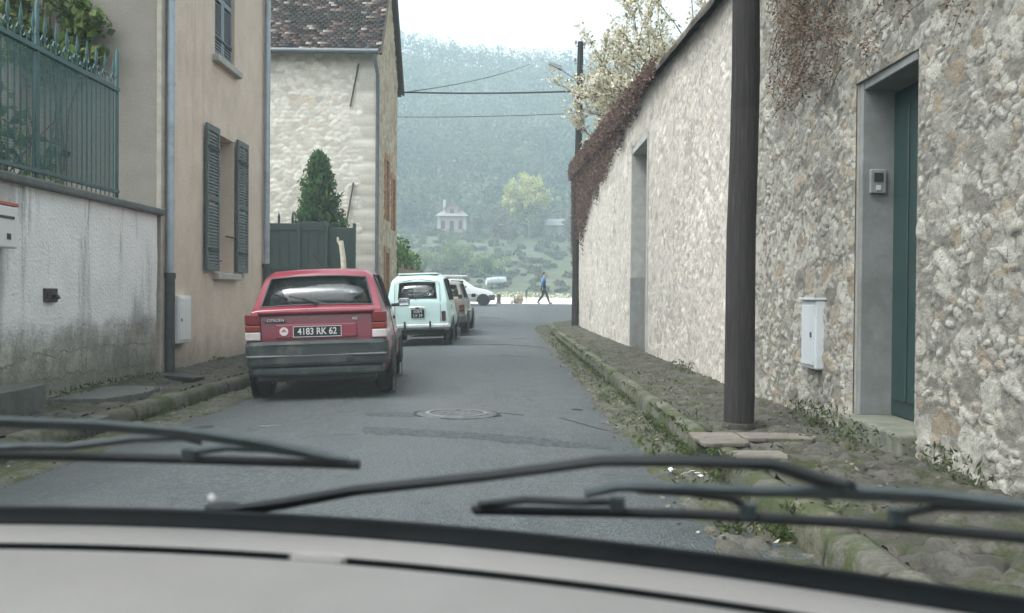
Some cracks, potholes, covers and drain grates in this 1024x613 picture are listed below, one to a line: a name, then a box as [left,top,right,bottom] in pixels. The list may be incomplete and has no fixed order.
manhole cover [416,409,497,419]
